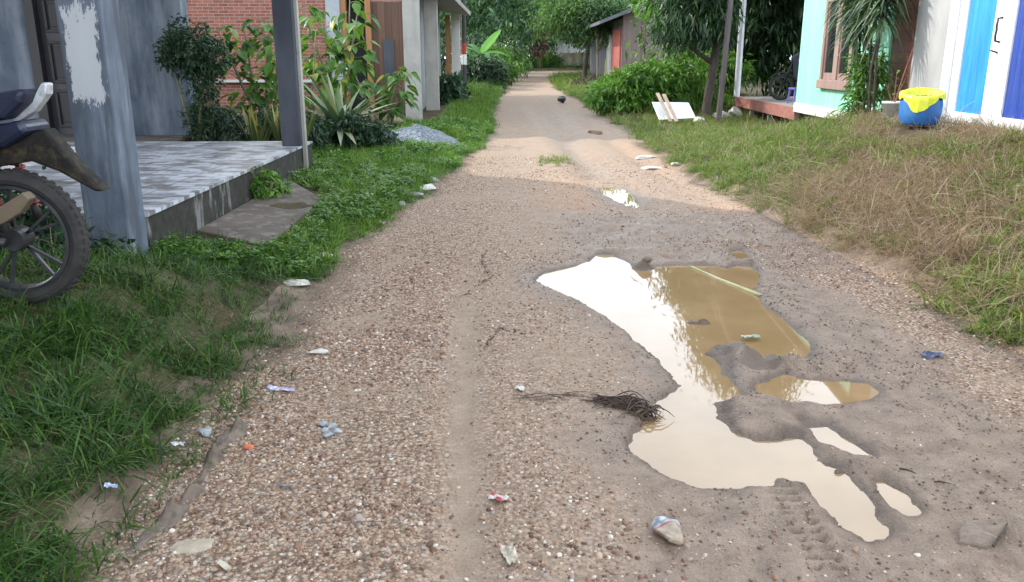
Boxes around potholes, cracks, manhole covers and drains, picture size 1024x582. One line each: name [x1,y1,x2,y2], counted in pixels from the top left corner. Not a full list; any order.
pothole [861,468,939,521]
pothole [529,249,907,550]
pothole [594,187,645,208]
